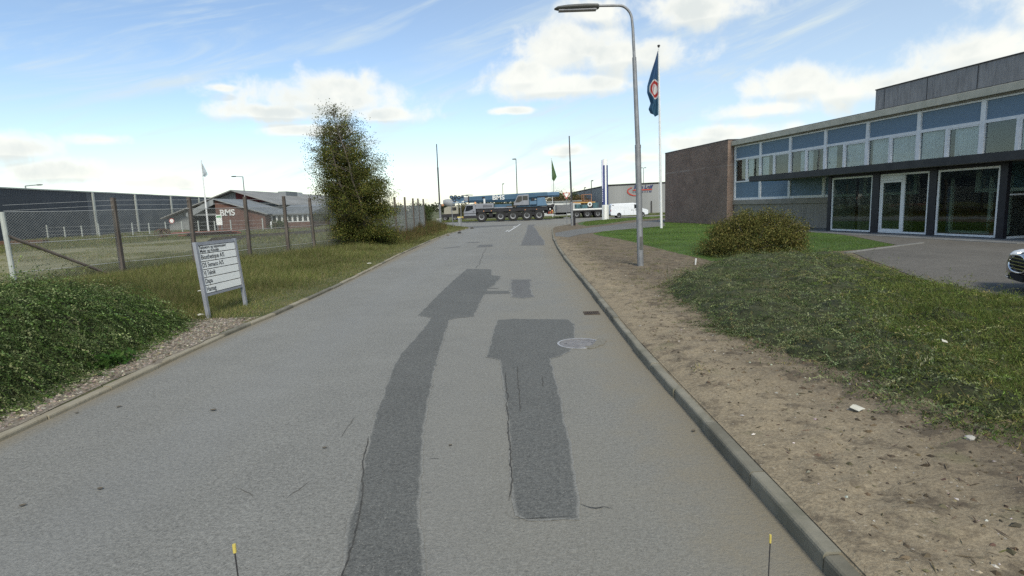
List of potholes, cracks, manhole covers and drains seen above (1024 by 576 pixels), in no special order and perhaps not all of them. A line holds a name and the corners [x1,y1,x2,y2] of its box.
crack [505,367,521,497]
crack [341,418,369,576]
manhole cover [557,338,596,349]
